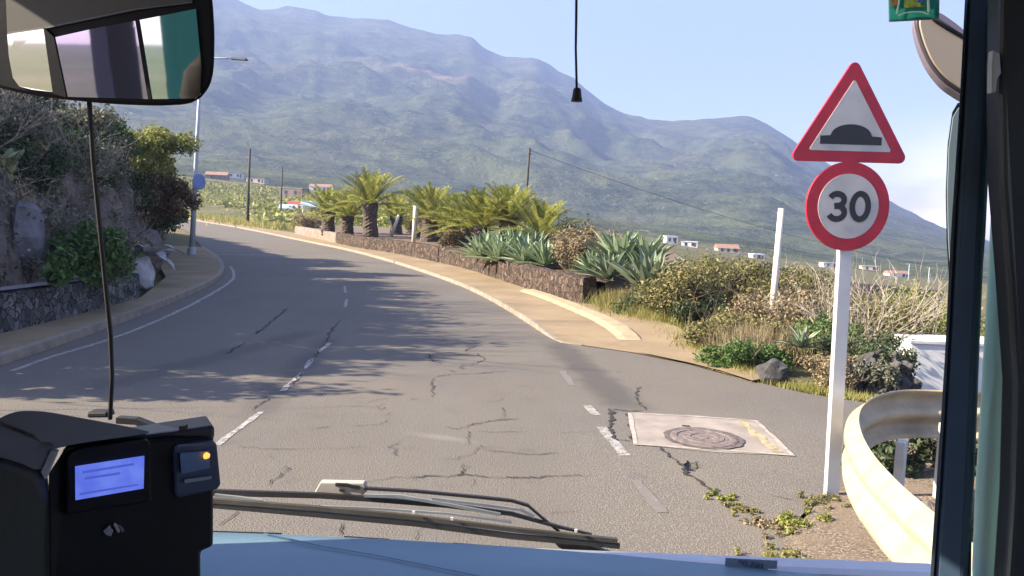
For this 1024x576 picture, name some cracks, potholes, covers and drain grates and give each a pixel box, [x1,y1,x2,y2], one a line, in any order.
crack [557,387,647,441]
crack [372,393,589,487]
crack [429,346,502,396]
crack [227,308,287,353]
manhole cover [663,427,745,449]
